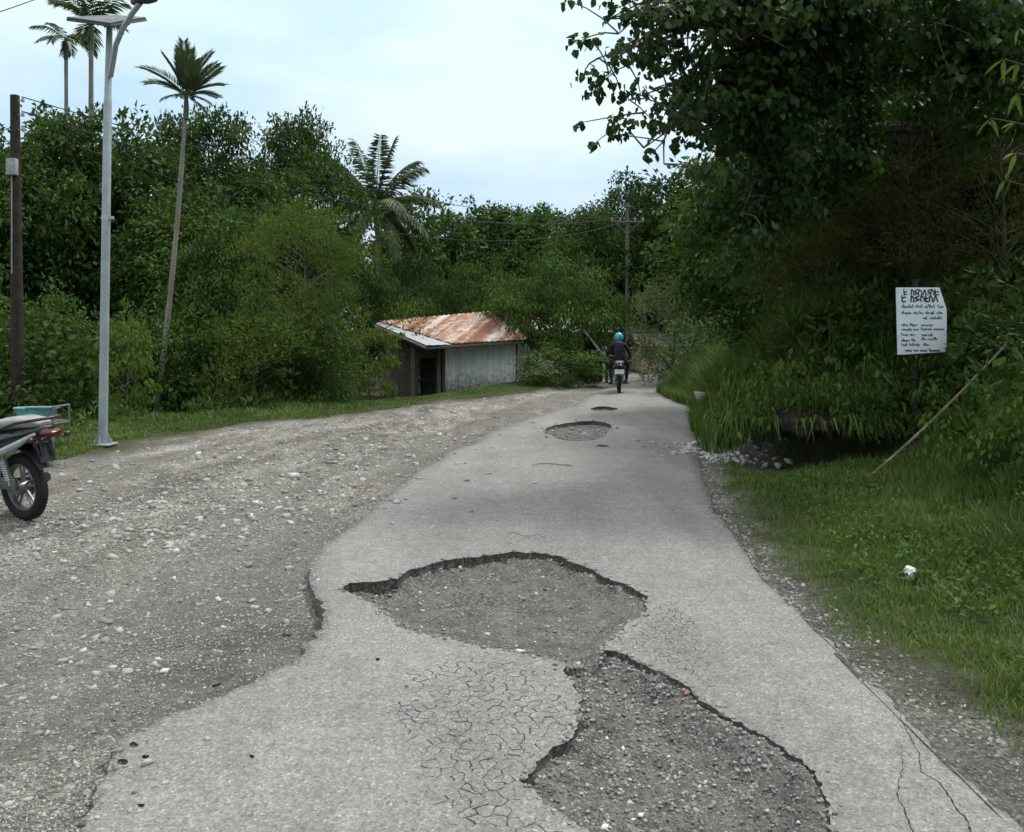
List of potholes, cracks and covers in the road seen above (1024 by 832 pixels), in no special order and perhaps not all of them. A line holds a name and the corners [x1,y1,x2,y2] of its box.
pothole [545,421,611,441]
crack [623,603,715,687]
pothole [522,650,831,832]
crack [393,654,568,832]
pothole [343,552,648,678]
crack [896,715,971,832]
